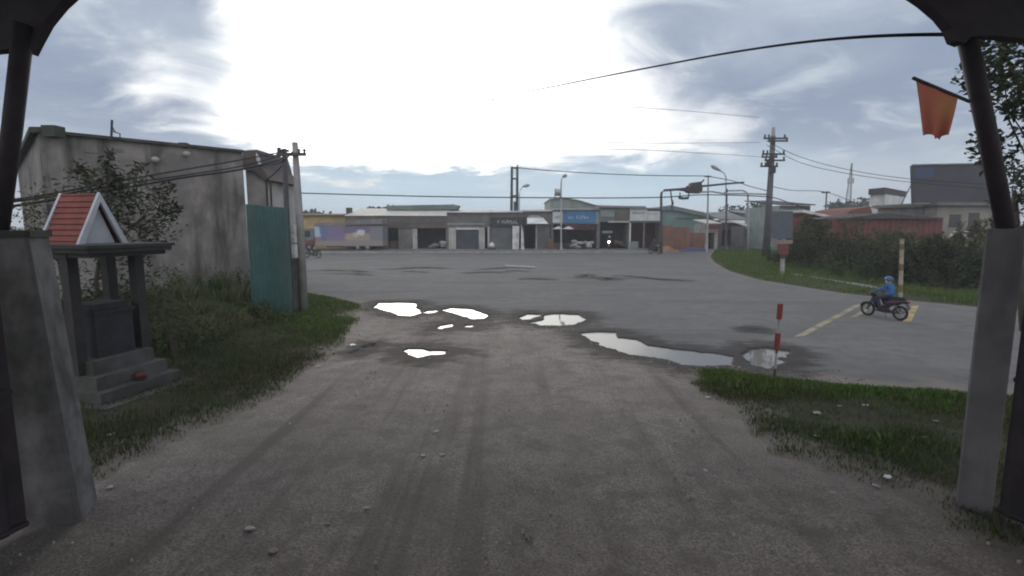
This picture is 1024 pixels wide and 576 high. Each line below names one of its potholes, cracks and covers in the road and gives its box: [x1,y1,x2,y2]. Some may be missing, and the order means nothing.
pothole [577,331,736,365]
pothole [739,346,793,367]
